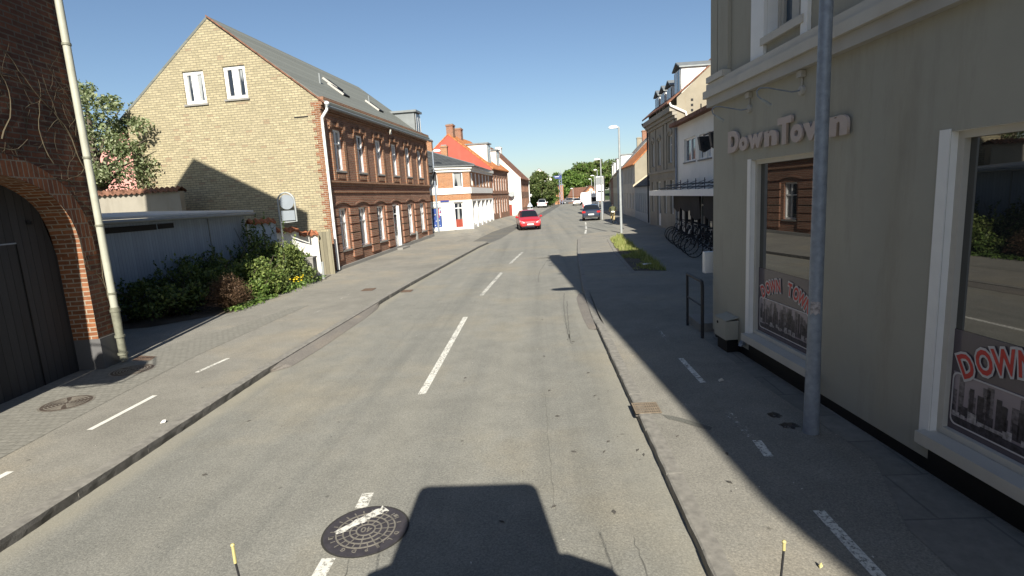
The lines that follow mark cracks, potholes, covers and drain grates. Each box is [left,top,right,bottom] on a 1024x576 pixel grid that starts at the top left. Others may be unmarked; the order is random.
manhole cover [37,395,95,412]
manhole cover [108,364,156,377]
drain grate [631,402,662,417]
manhole cover [321,506,409,558]
crack [563,294,571,342]
